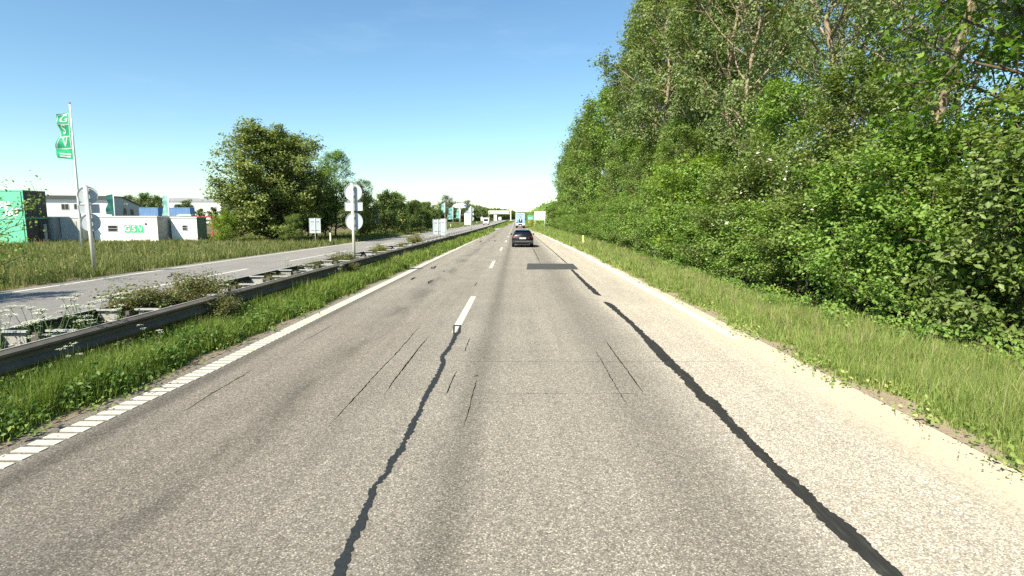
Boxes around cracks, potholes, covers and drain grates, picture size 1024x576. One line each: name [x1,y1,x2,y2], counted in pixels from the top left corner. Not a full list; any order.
crack [180,371,250,413]
crack [329,329,689,425]
